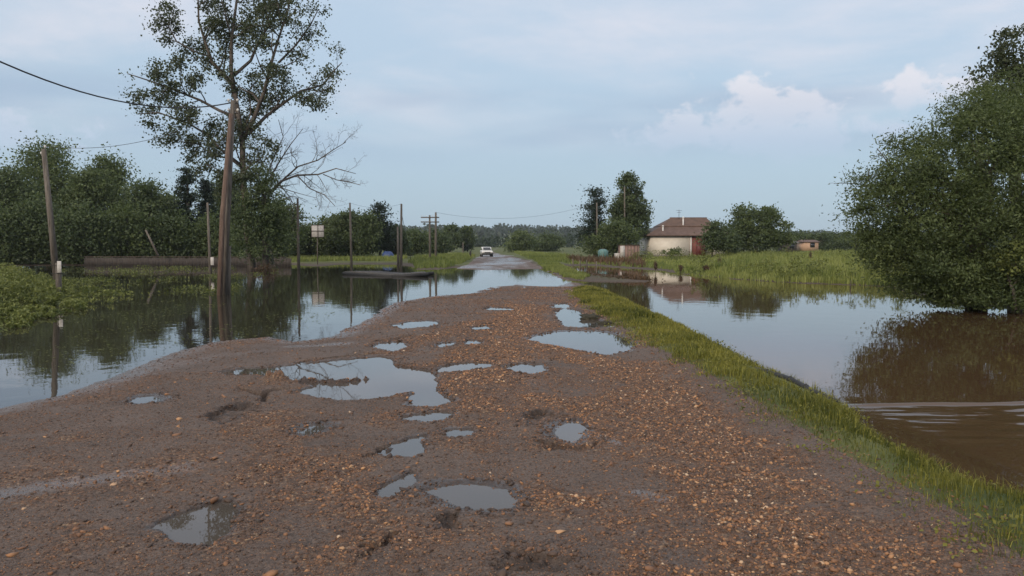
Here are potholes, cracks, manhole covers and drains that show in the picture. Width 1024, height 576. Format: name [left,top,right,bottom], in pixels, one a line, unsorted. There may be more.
pothole [204,401,266,425]
pothole [554,308,616,328]
pothole [391,320,444,329]
pothole [439,426,478,437]
pothole [496,362,551,374]
pothole [371,340,411,351]
pothole [217,355,461,406]
pothole [120,393,176,404]
pothole [540,416,595,445]
pothole [397,407,460,422]
pothole [378,432,431,457]
pothole [433,360,495,373]
